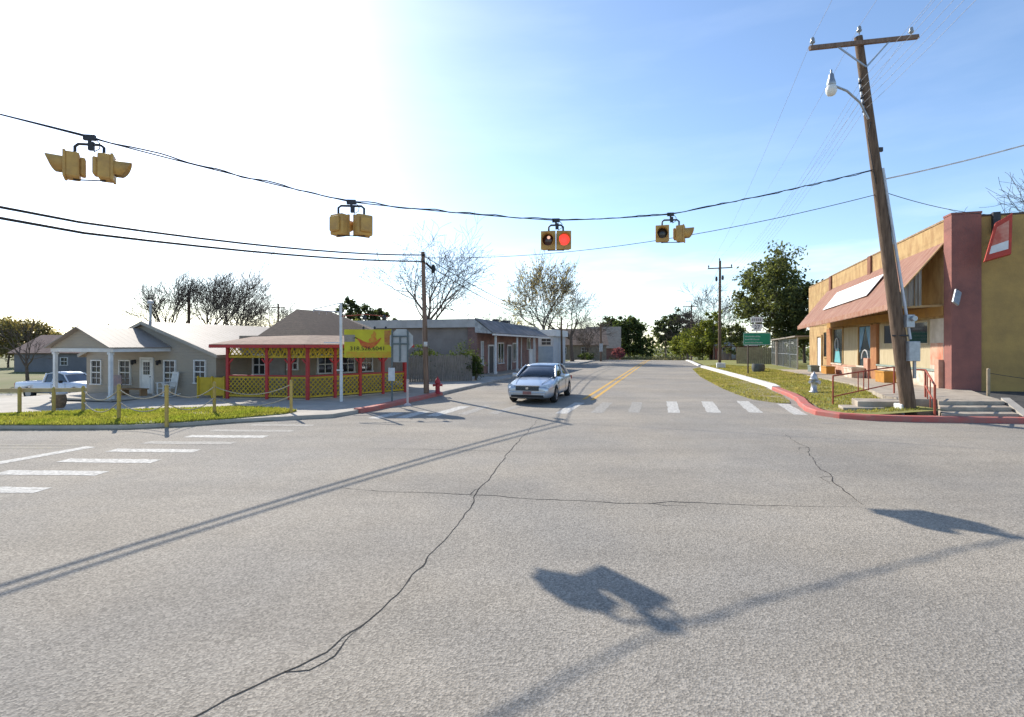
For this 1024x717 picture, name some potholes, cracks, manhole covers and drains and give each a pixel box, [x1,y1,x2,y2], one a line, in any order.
crack [193,418,862,717]
